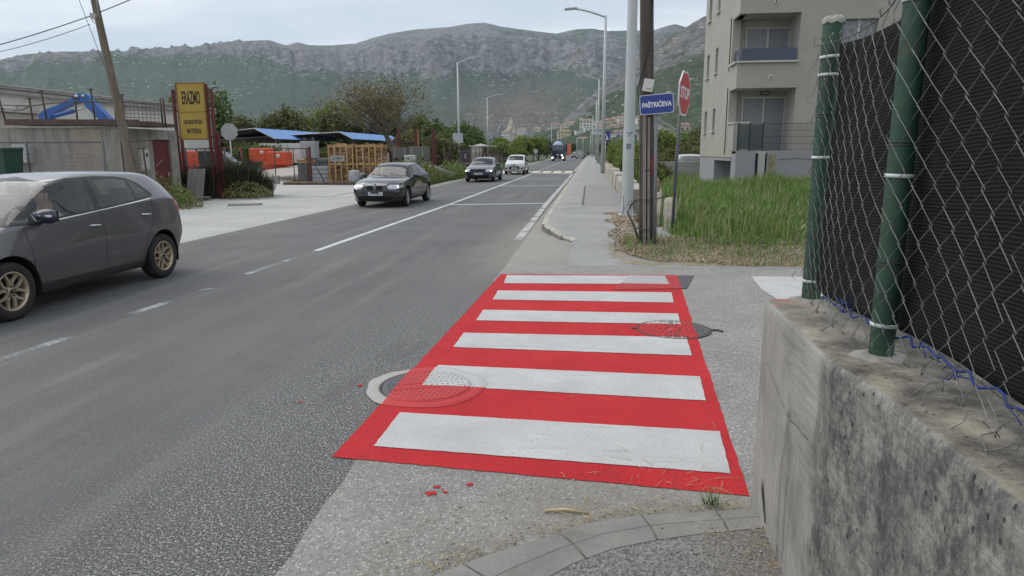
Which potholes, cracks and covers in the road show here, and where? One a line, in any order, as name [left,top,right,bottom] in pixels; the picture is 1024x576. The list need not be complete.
drain grate [613,275,693,290]
manhole cover [366,367,488,408]
manhole cover [631,320,723,339]
